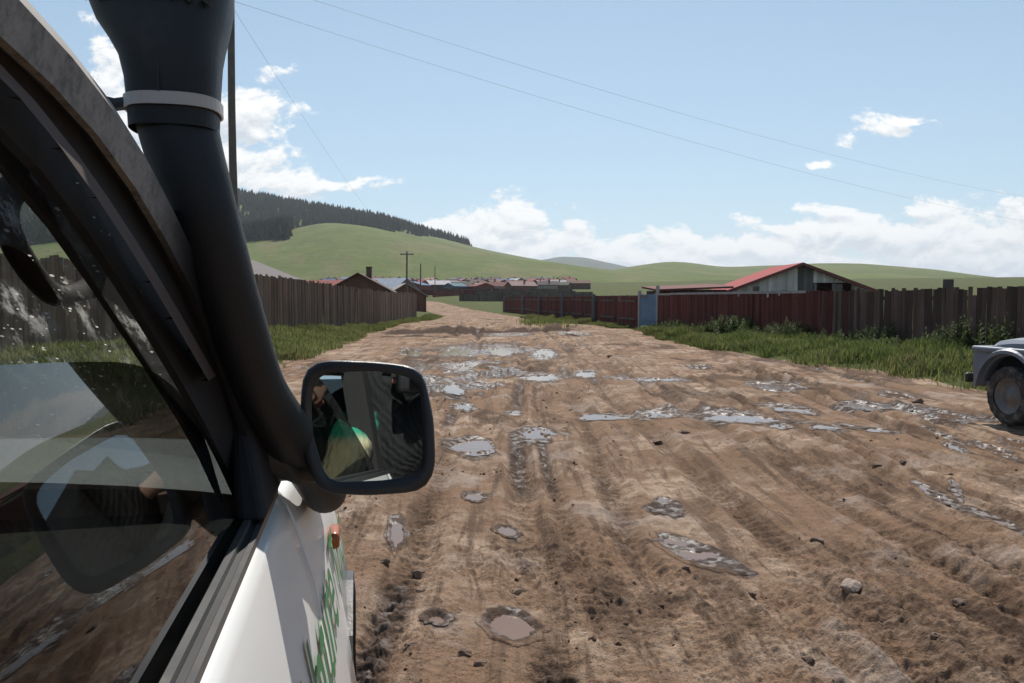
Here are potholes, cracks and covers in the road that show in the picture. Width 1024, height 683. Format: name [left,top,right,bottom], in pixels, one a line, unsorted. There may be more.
pothole [441,434,501,461]
pothole [439,379,468,399]
pothole [474,602,552,648]
pothole [692,412,797,426]
pothole [461,490,488,503]
pothole [530,348,559,363]
pothole [645,529,758,576]
pothole [513,426,566,444]
